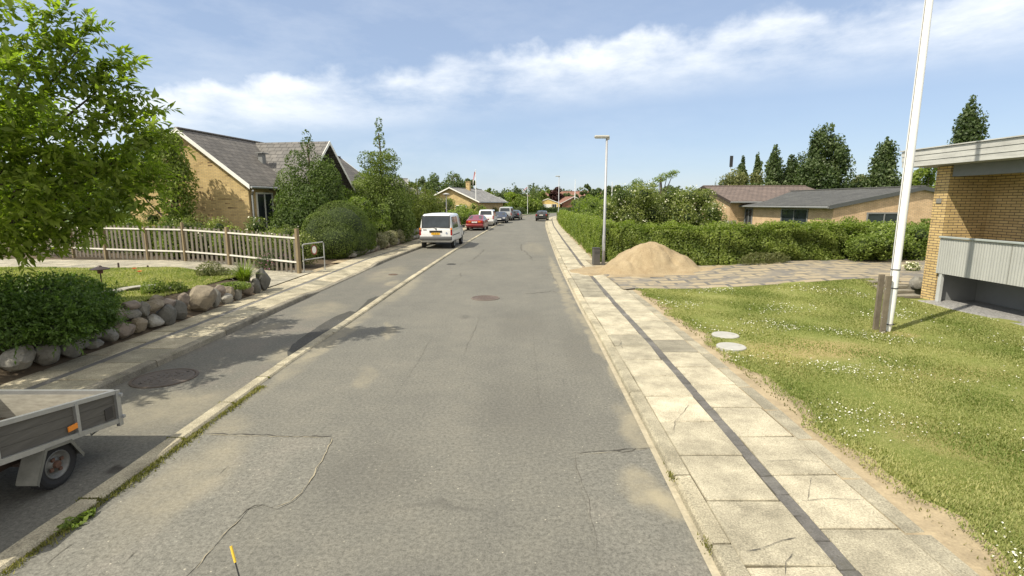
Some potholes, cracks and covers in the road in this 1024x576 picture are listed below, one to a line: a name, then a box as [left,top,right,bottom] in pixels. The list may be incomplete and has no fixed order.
manhole cover [128,368,199,389]
crack [197,433,332,567]
